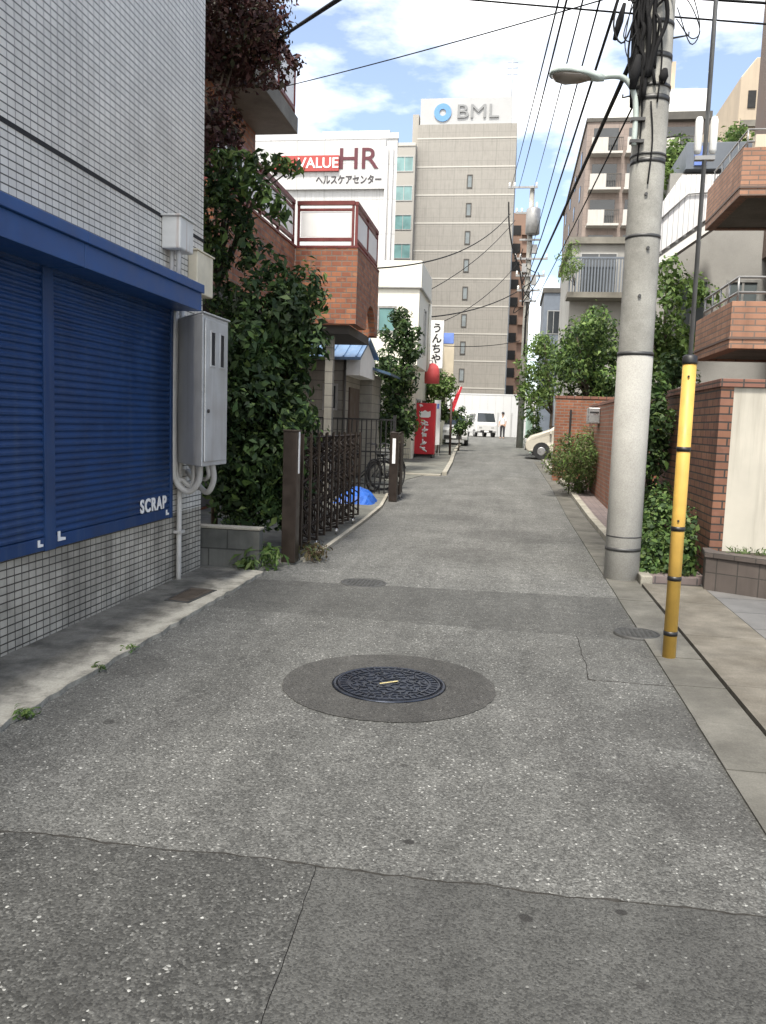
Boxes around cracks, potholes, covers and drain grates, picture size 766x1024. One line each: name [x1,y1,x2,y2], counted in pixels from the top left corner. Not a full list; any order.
manhole cover [341,578,386,588]
manhole cover [613,627,660,641]
crack [577,638,673,687]
manhole cover [332,667,446,703]
manhole cover [164,587,217,603]
